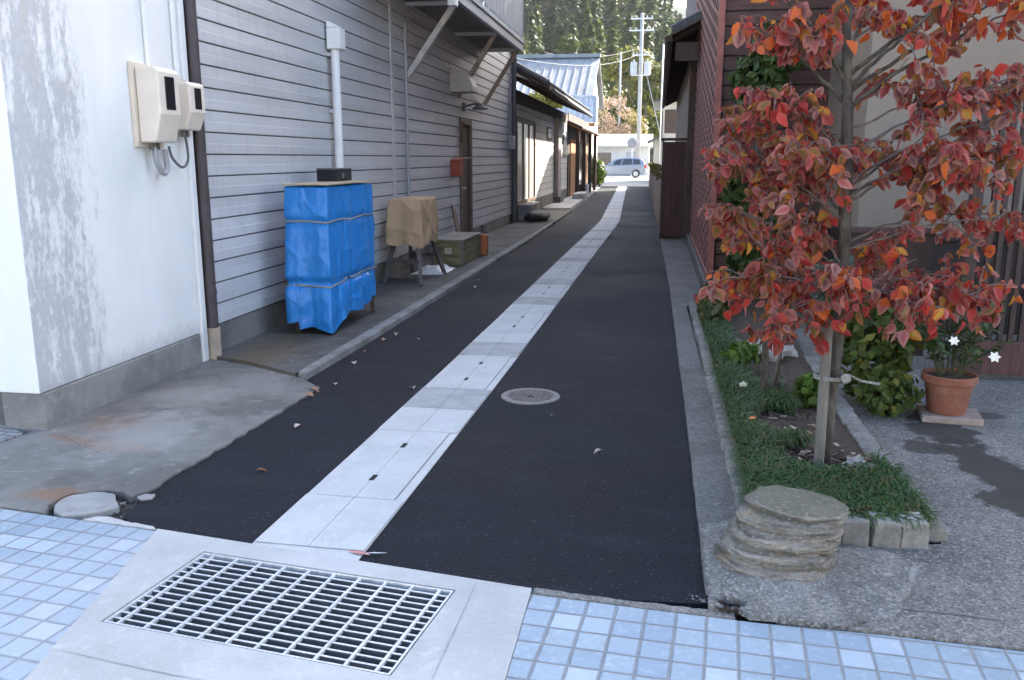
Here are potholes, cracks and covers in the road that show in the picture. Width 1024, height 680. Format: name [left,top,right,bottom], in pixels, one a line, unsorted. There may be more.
drain grate [103,553,454,676]
crack [3,432,112,472]
manhole cover [501,388,560,405]
